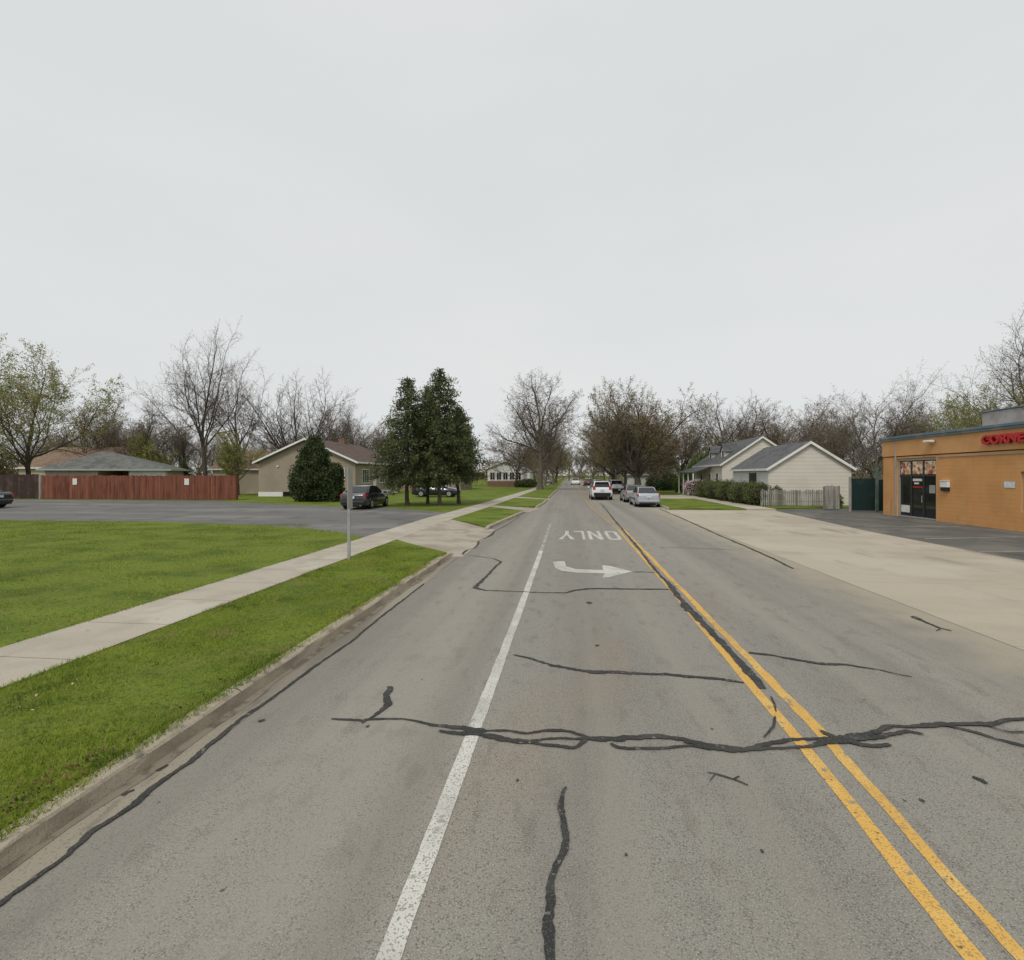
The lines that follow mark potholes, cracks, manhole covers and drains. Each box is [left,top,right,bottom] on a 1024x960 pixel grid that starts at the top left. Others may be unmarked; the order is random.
crack [709,772,748,785]
crack [911,616,949,631]
